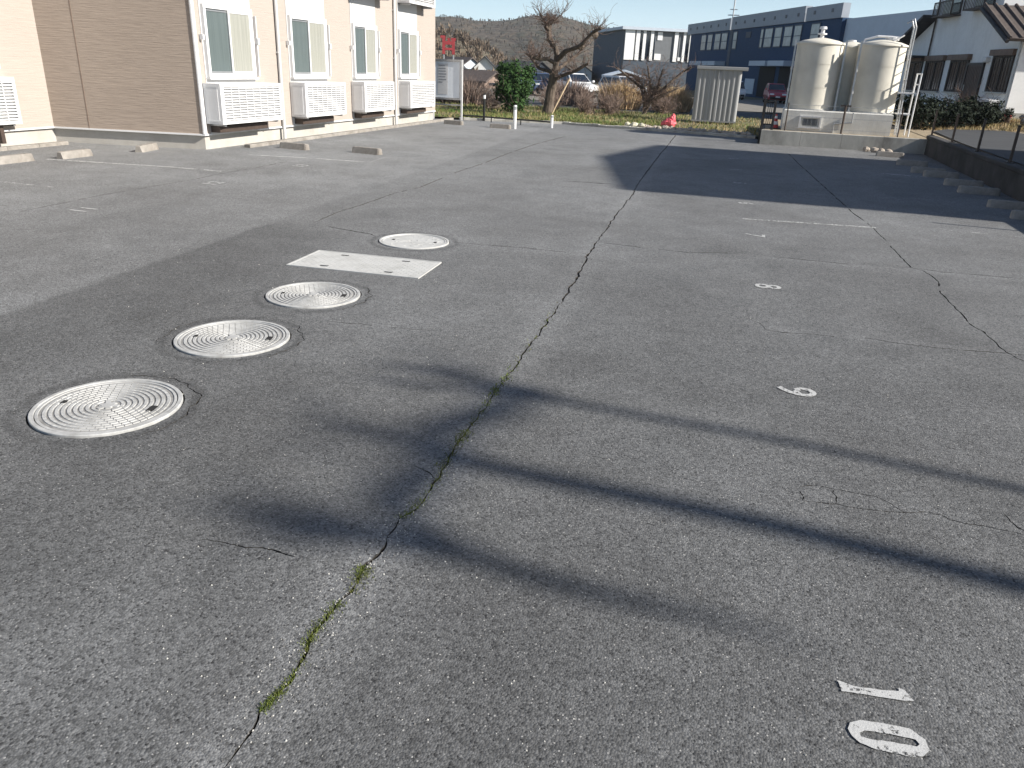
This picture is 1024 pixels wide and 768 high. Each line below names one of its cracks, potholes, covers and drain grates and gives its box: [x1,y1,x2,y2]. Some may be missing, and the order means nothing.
manhole cover [264,282,362,309]
crack [755,154,1023,361]
manhole cover [172,320,291,358]
manhole cover [26,379,185,439]
utility cover [286,250,442,279]
crack [799,485,1023,535]
crack [203,539,295,557]
manhole cover [378,233,450,249]
crack [224,135,842,768]
